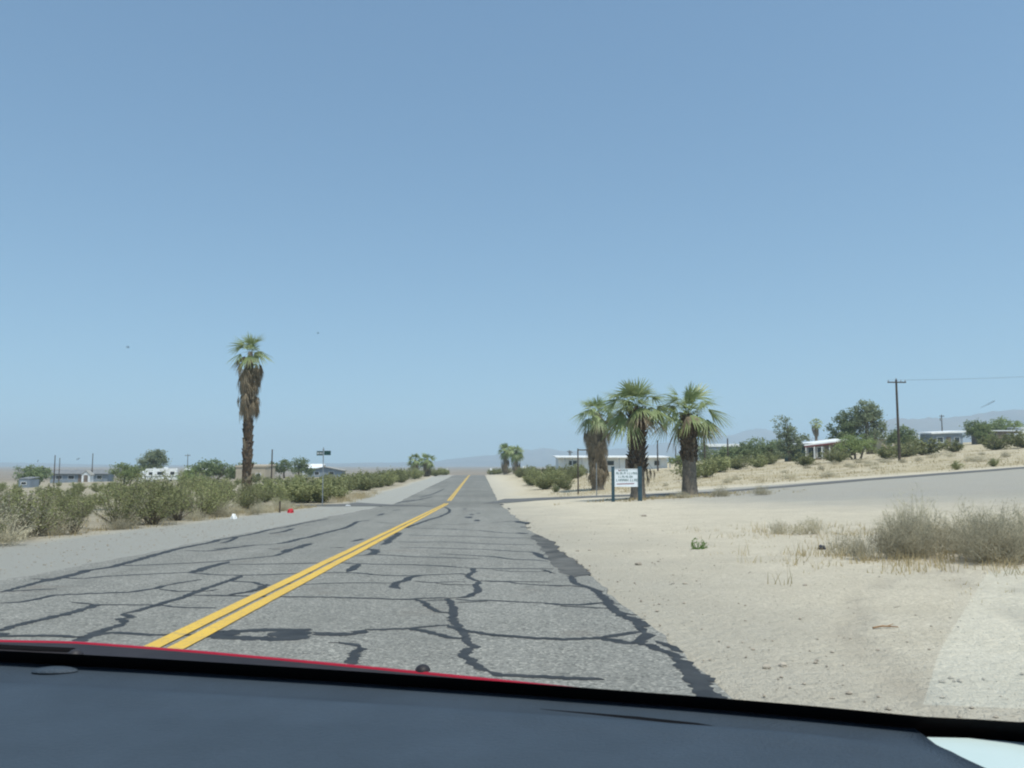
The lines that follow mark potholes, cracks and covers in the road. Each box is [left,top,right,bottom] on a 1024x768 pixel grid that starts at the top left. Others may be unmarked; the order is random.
crack [0,507,648,644]
